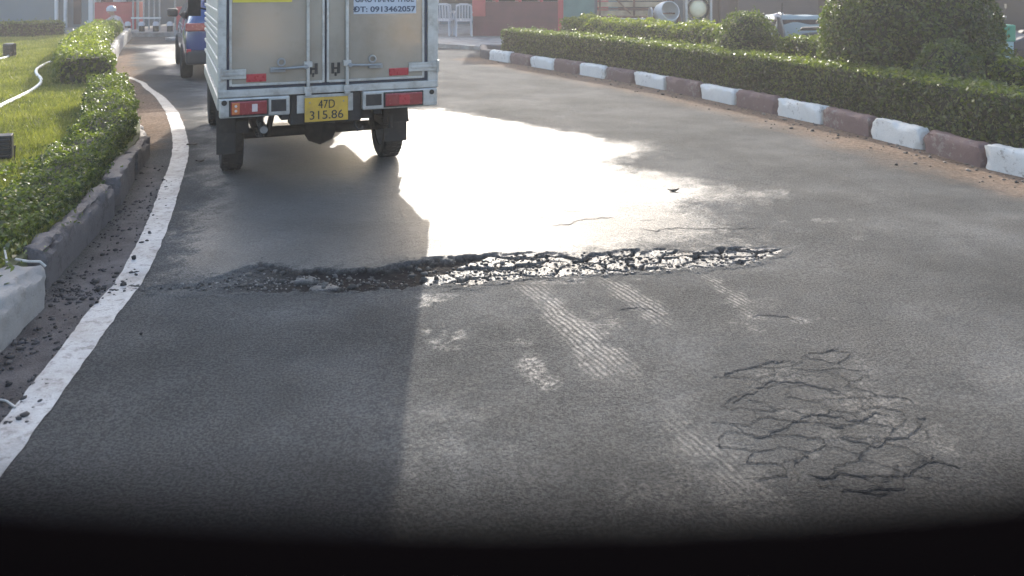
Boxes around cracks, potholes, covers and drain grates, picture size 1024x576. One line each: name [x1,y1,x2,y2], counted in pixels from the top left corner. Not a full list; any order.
crack [640,220,756,232]
crack [712,348,960,487]
pothole [123,242,796,299]
